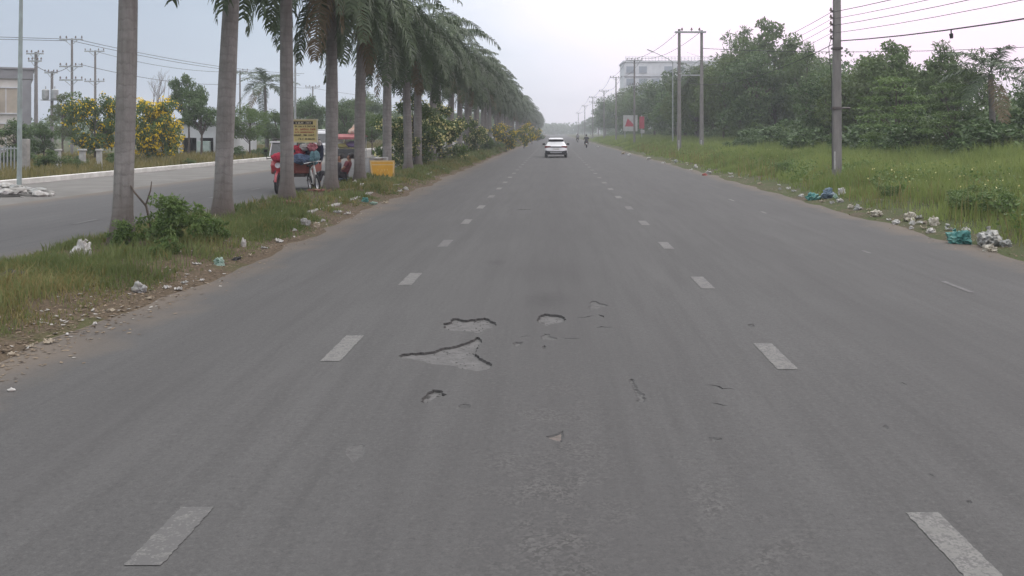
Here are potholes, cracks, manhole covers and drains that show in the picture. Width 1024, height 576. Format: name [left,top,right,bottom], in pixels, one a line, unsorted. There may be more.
pothole [443,318,496,333]
pothole [399,337,492,371]
pothole [420,390,447,403]
pothole [537,314,566,326]
pothole [546,431,565,442]
pothole [588,301,608,310]
